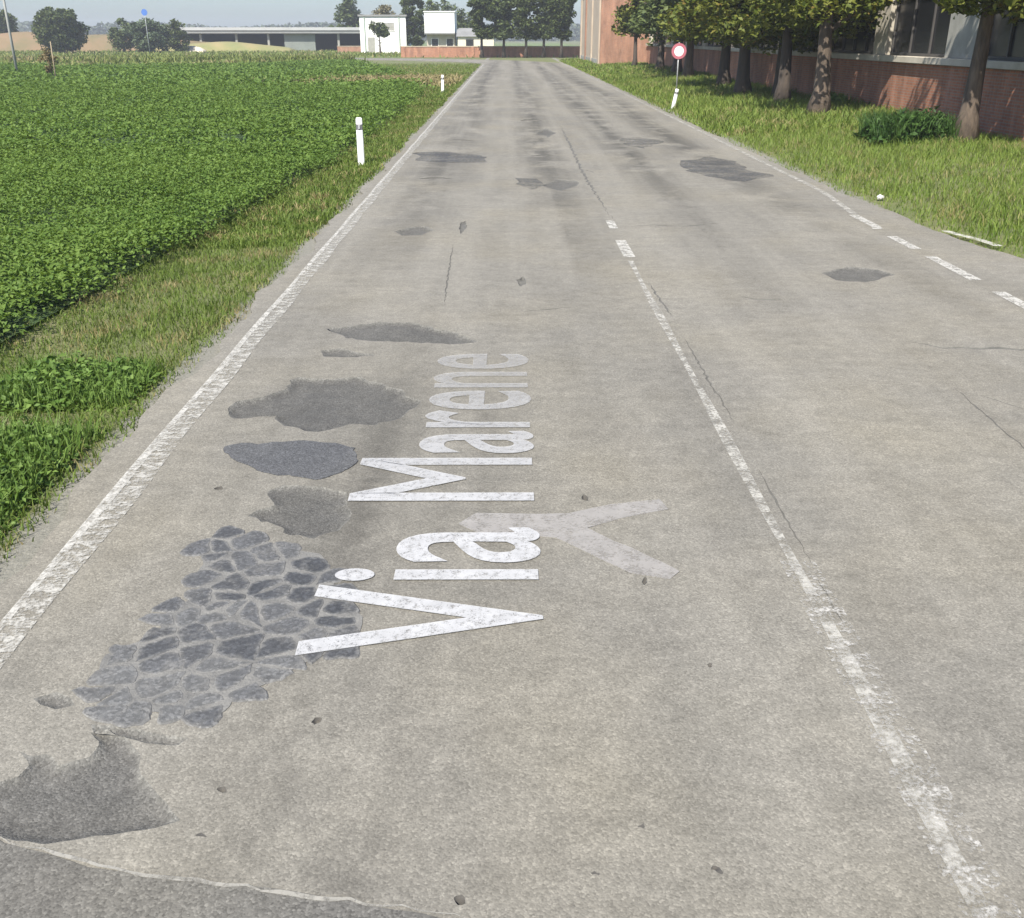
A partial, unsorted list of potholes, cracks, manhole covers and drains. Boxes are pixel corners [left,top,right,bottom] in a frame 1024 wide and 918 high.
crack [908,341,1024,351]
crack [444,245,453,302]
crack [533,130,613,219]
crack [958,391,1024,449]
